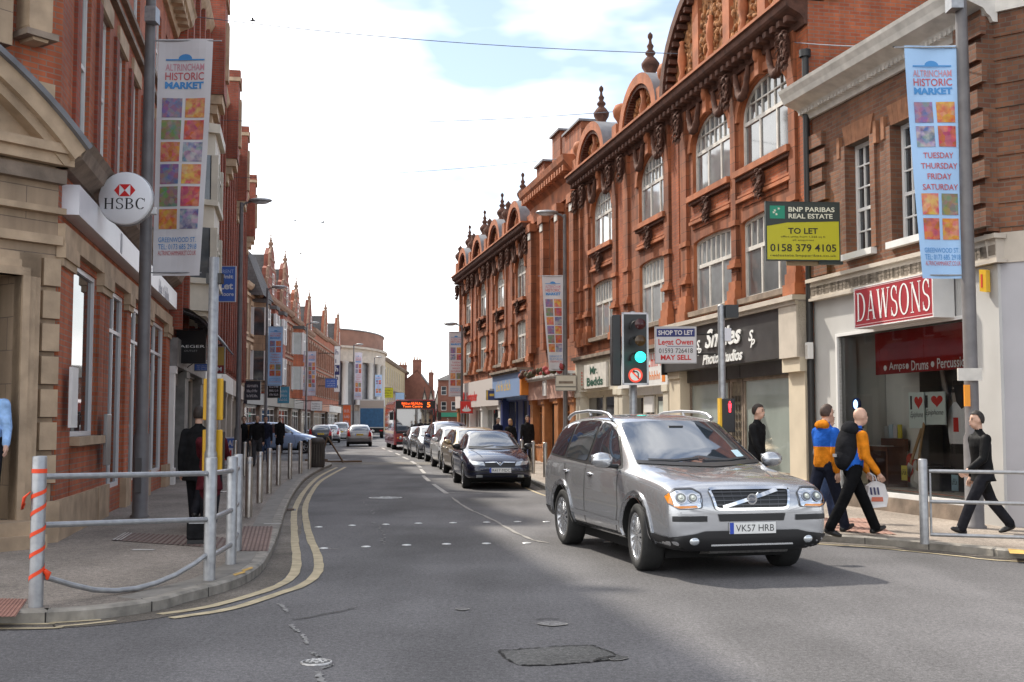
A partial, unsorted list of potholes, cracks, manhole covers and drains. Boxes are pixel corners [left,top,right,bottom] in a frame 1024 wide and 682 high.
crack [277,603,358,682]
manhole cover [300,658,332,666]
